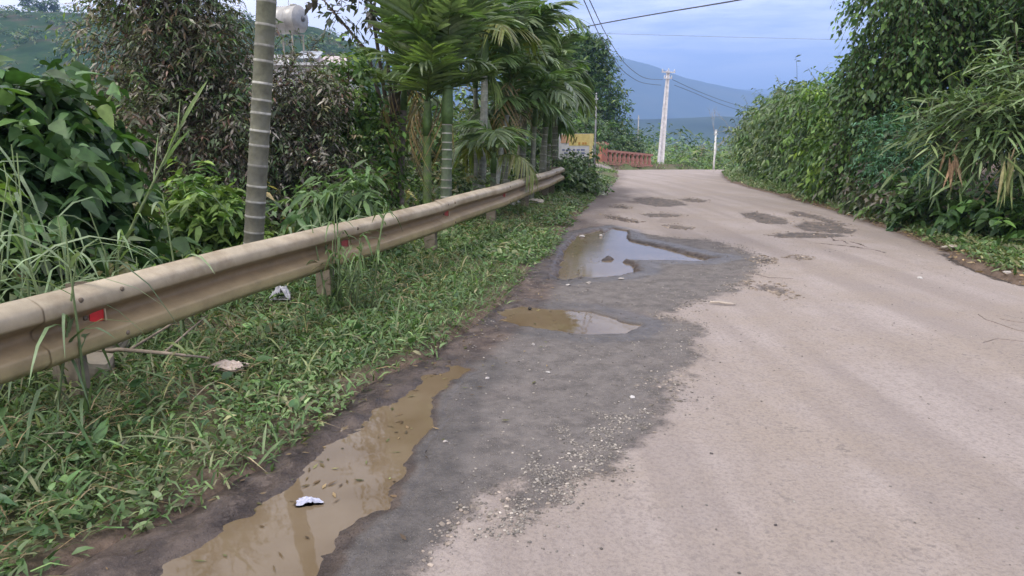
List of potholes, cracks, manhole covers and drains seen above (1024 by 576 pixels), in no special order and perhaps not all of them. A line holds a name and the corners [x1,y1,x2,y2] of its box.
pothole [546,226,727,281]
pothole [786,210,852,227]
pothole [490,304,647,336]
pothole [631,197,690,207]
pothole [124,360,483,576]
pothole [791,220,861,234]
pothole [738,211,791,224]
